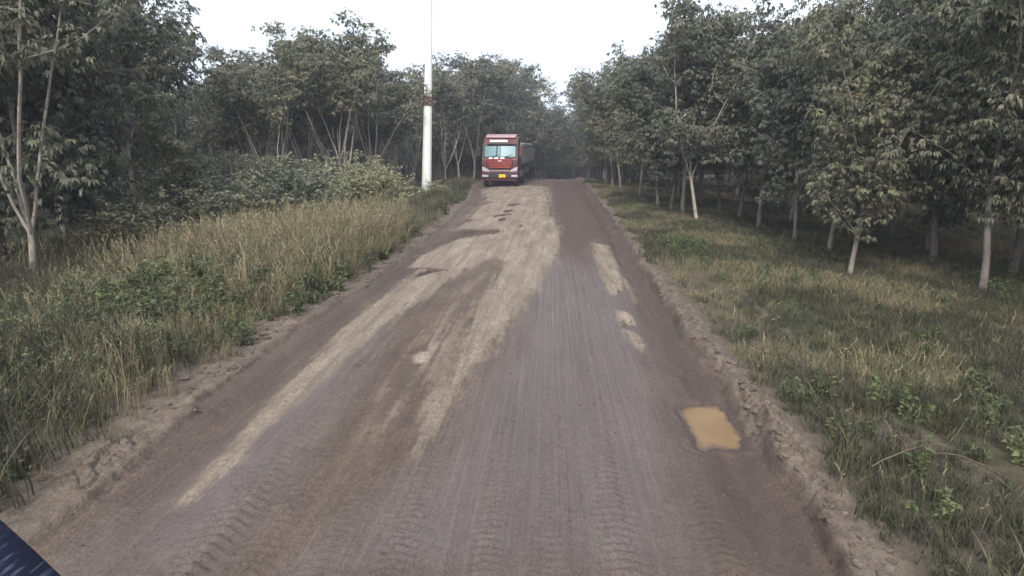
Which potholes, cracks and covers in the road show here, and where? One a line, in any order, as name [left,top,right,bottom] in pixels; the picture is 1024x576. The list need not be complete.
pothole [667,393,764,458]
